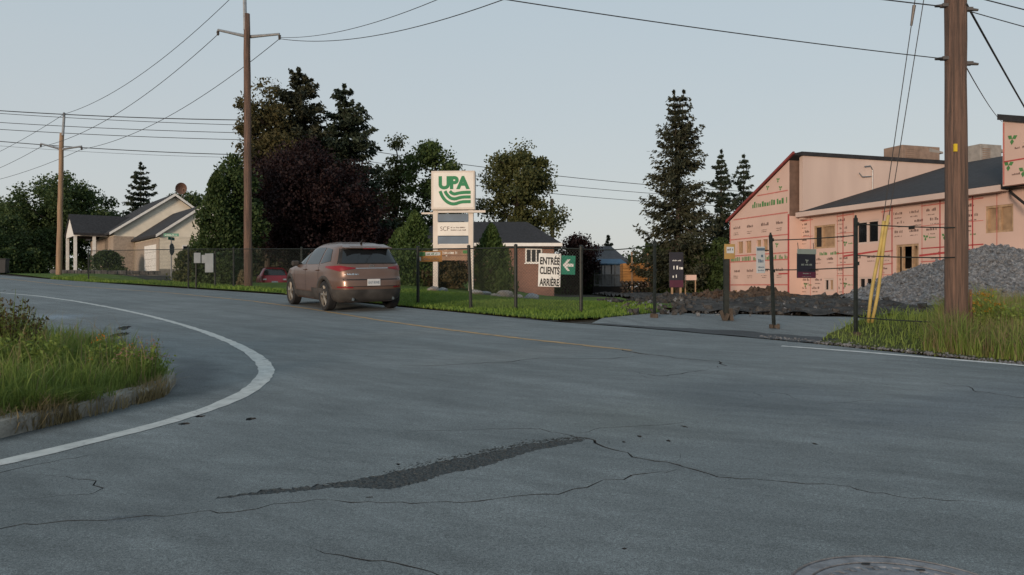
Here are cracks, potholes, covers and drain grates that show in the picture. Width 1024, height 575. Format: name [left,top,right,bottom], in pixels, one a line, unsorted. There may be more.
crack [309,547,438,575]
crack [0,421,991,529]
manhole cover [791,555,979,575]
